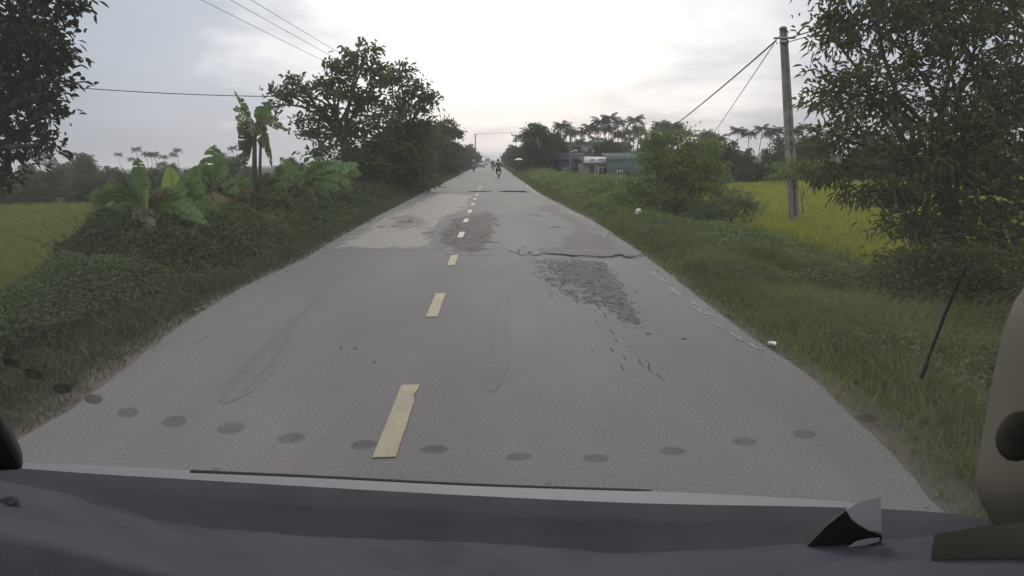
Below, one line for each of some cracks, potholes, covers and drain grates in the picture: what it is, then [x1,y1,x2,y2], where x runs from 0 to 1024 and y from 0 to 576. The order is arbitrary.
crack [429,212,663,380]
